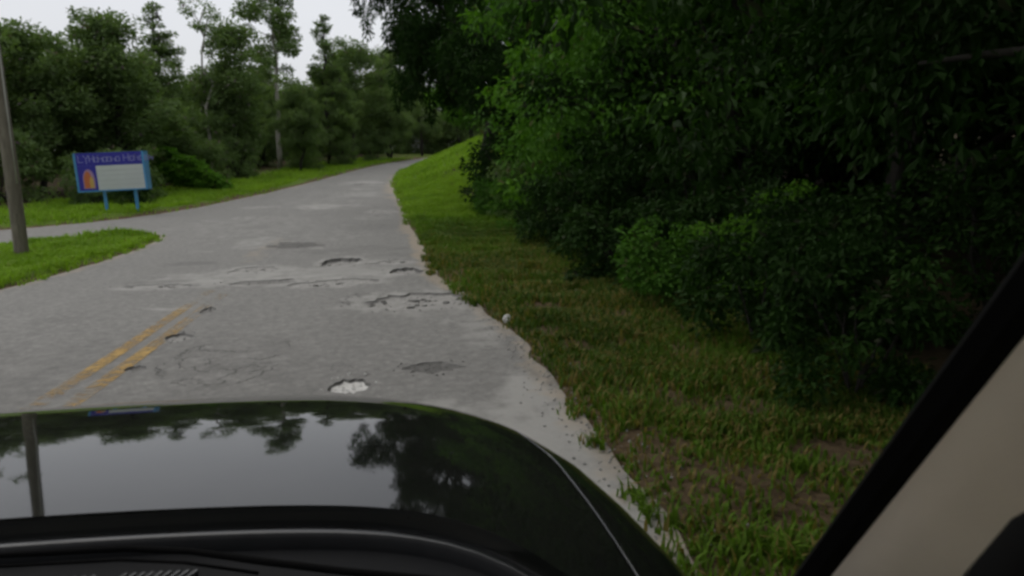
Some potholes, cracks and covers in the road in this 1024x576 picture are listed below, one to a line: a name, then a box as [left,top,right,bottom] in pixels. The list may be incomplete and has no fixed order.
pothole [320,373,377,394]
pothole [160,331,200,343]
pothole [265,241,329,250]
pothole [393,359,467,376]
pothole [316,255,365,266]
crack [154,339,290,385]
pothole [382,267,426,275]
pothole [340,290,465,312]
